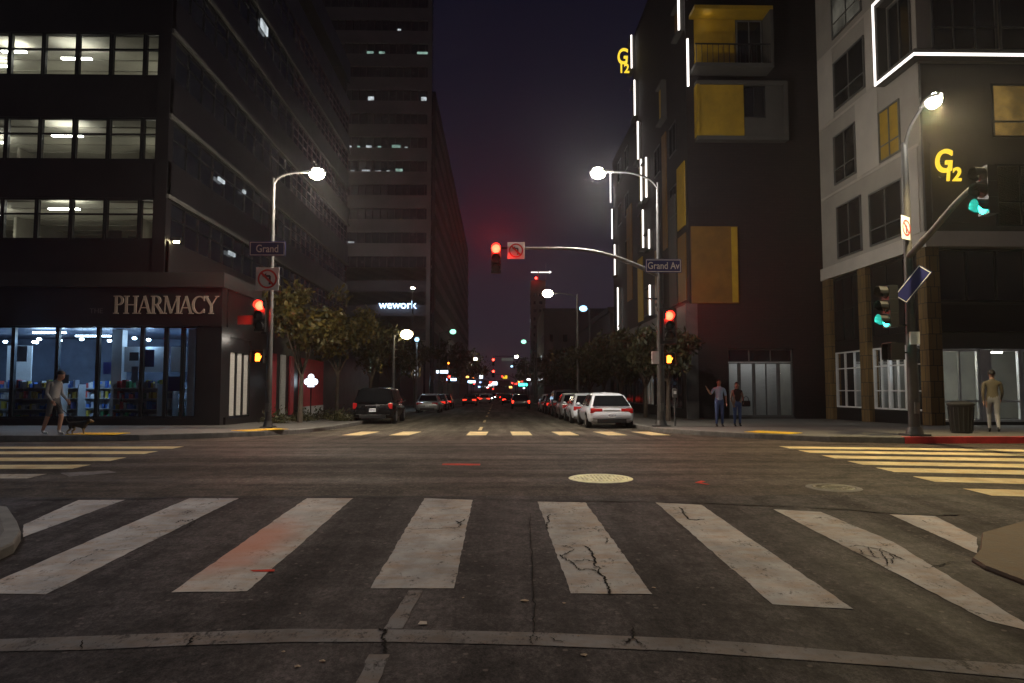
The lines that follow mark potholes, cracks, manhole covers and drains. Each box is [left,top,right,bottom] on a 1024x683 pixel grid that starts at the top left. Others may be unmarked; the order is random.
crack [529,514,561,644]
crack [560,537,611,594]
crack [854,542,905,566]
manhole cover [569,474,633,483]
manhole cover [805,483,863,492]
crack [379,628,387,652]
